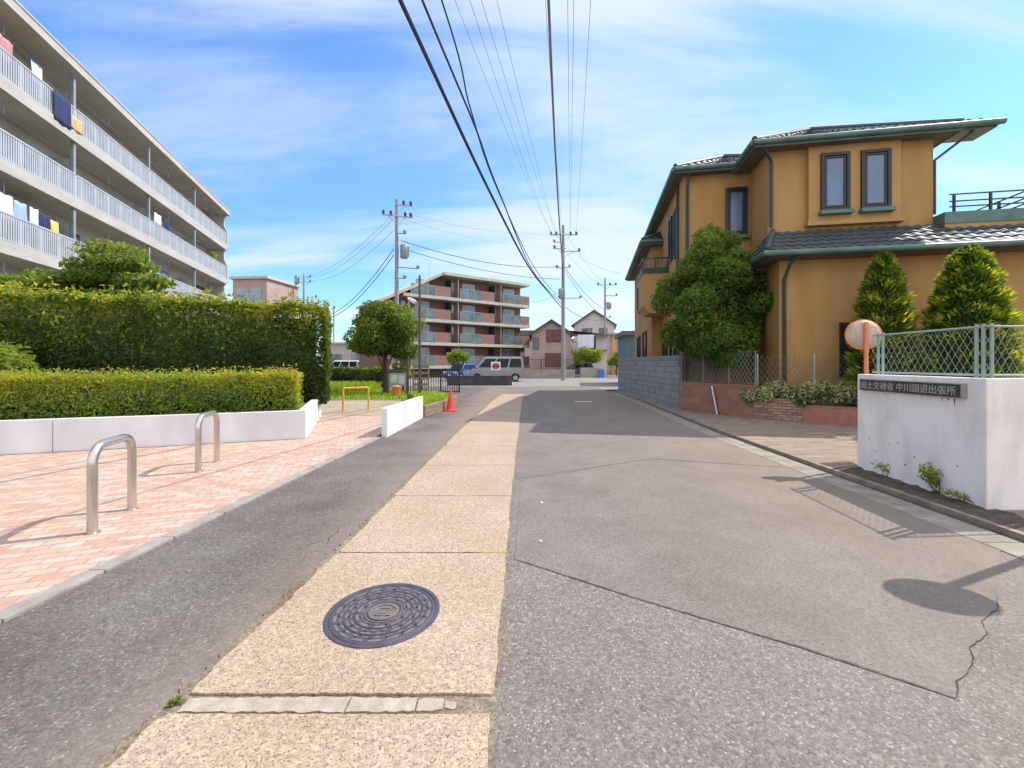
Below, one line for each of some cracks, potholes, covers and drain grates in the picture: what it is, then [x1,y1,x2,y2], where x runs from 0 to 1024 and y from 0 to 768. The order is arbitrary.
crack [522,560,998,696]
manhole cover [323,583,440,649]
